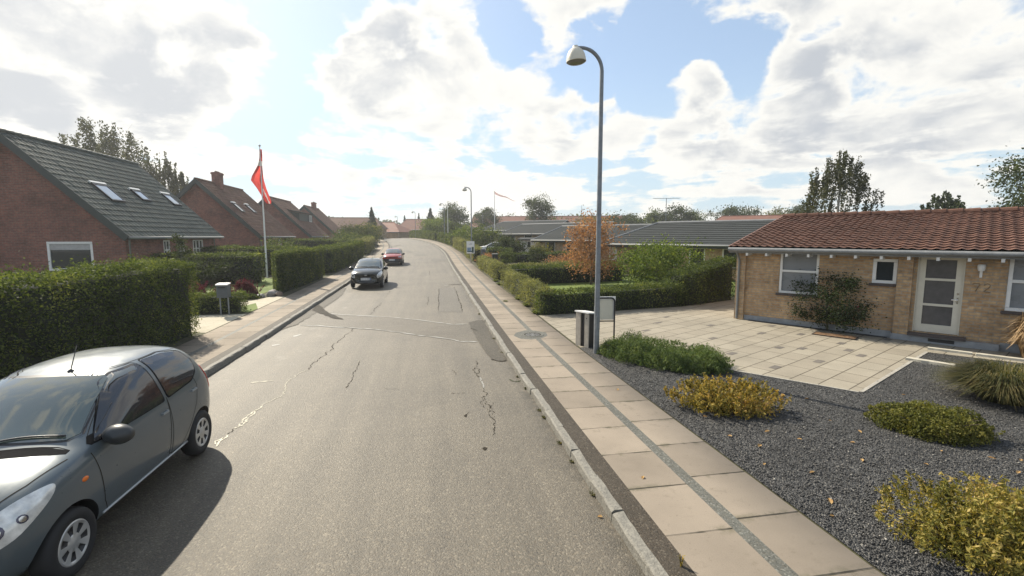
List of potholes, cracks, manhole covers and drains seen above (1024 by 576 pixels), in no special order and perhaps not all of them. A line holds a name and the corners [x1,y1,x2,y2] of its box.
crack [468,359,506,435]
